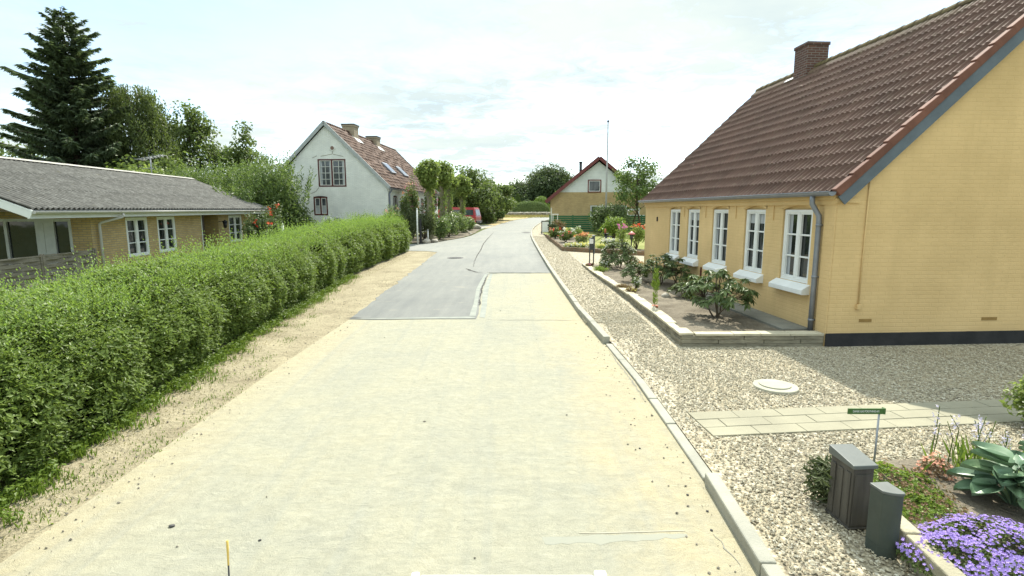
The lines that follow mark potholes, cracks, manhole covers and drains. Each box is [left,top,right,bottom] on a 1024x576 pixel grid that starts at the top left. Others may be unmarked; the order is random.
manhole cover [752,379,799,395]
